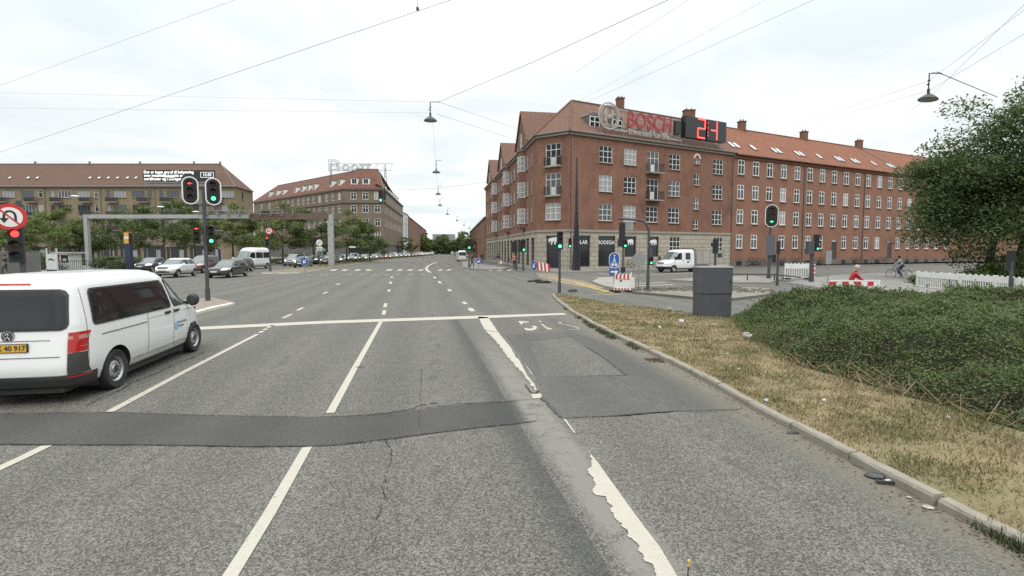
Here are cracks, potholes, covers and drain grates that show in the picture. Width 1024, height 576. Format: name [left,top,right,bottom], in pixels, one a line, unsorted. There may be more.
crack [373,439,393,546]
